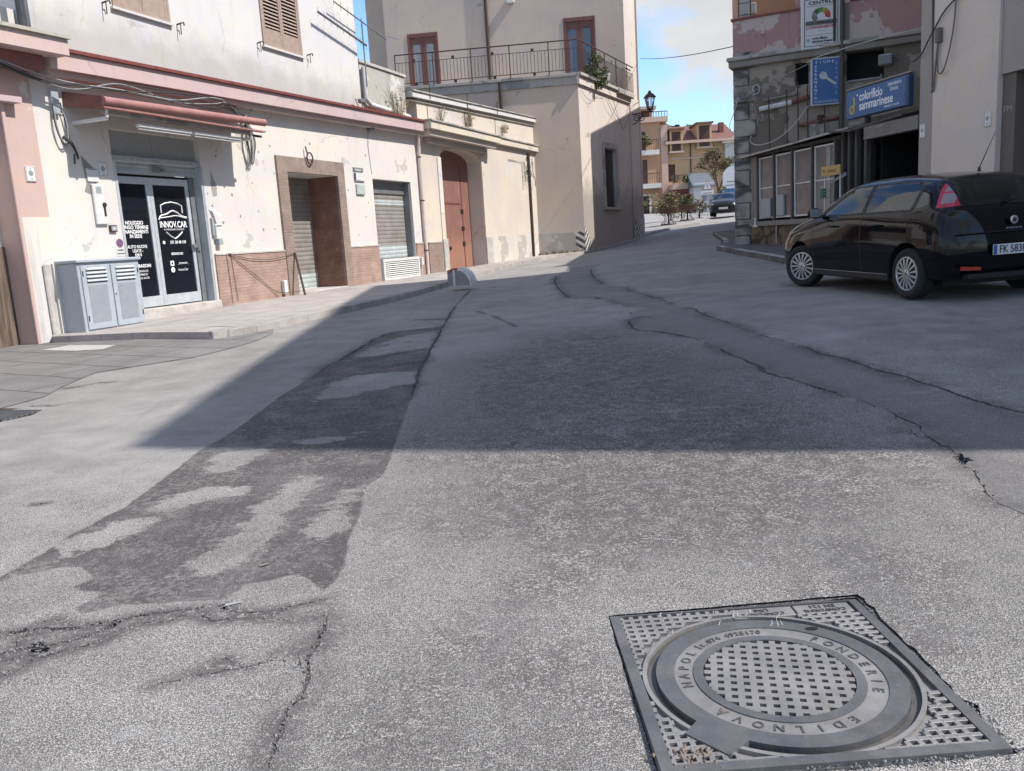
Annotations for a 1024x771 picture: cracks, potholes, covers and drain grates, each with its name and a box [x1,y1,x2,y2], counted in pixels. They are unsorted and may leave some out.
crack [553,270,1024,514]
crack [0,599,328,771]
manhole cover [608,594,1024,771]
